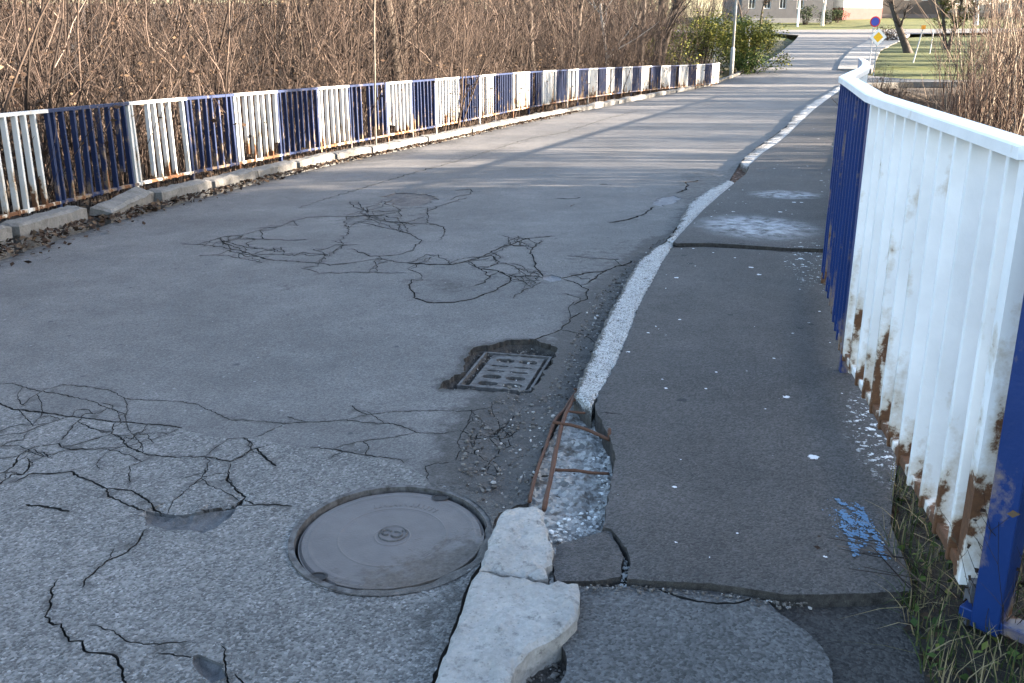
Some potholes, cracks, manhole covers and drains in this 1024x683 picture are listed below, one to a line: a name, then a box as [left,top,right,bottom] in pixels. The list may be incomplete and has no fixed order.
crack [398,236,632,341]
pothole [529,402,612,556]
crack [194,189,473,274]
drain grate [457,352,552,395]
crack [259,402,524,479]
pothole [144,500,243,533]
crack [44,579,244,683]
manhole cover [288,484,495,596]
crack [0,383,290,587]
